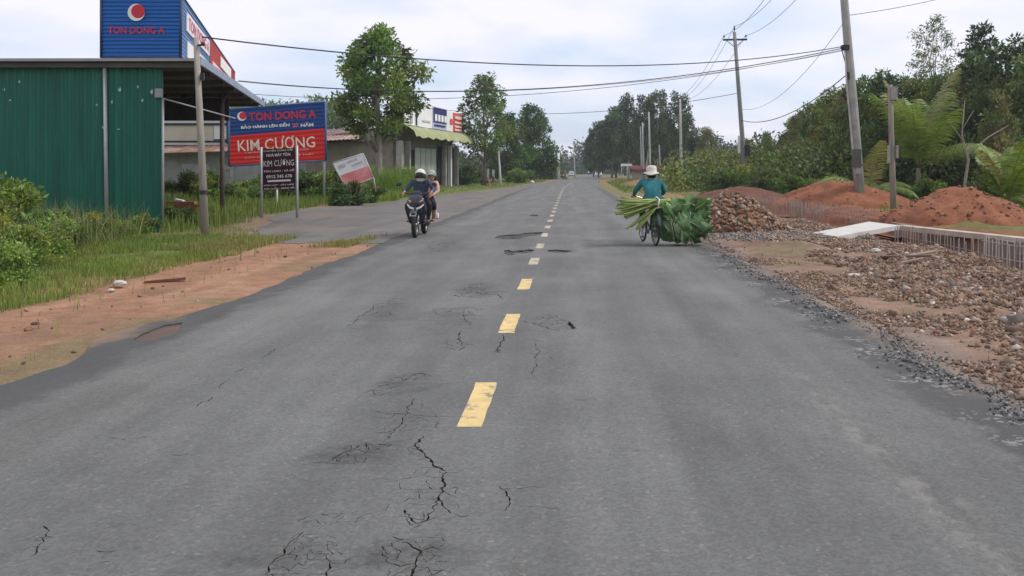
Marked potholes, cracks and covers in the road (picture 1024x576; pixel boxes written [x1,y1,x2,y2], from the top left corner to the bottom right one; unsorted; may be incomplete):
crack [524,314,569,376]
crack [499,486,560,511]
crack [432,284,503,350]
crack [308,373,470,576]
pothole [134,322,183,341]
crack [25,526,55,556]
